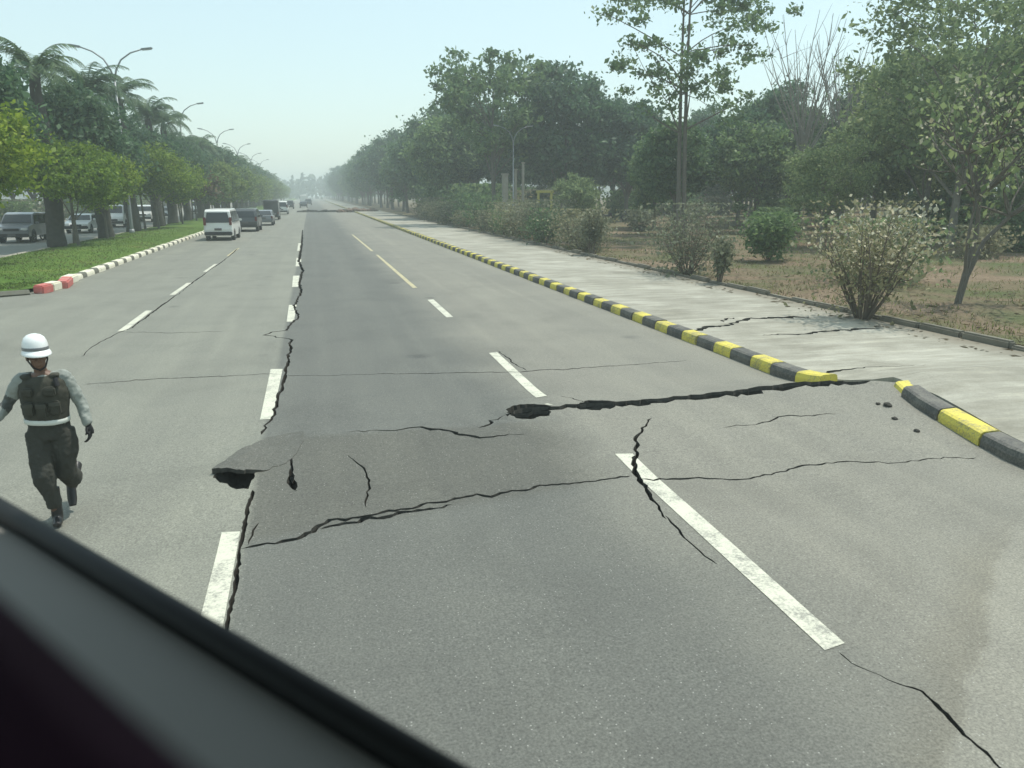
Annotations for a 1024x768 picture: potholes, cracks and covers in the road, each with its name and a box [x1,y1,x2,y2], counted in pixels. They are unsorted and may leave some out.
crack [840,653,1001,768]
pothole [213,472,255,489]
crack [95,230,974,628]
